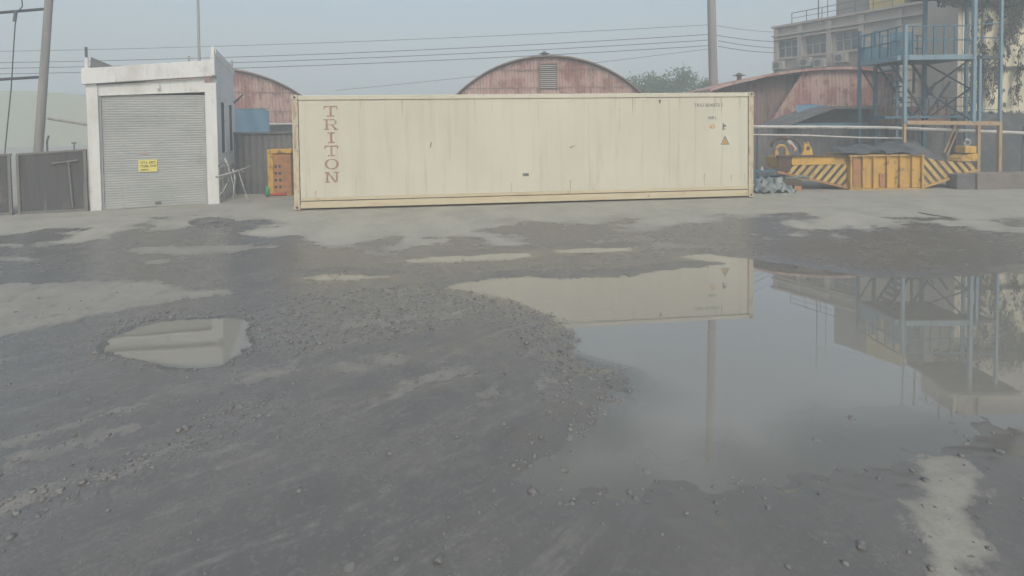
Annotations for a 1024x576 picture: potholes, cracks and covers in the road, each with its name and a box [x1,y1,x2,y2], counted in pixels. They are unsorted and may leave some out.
pothole [95,315,257,371]
